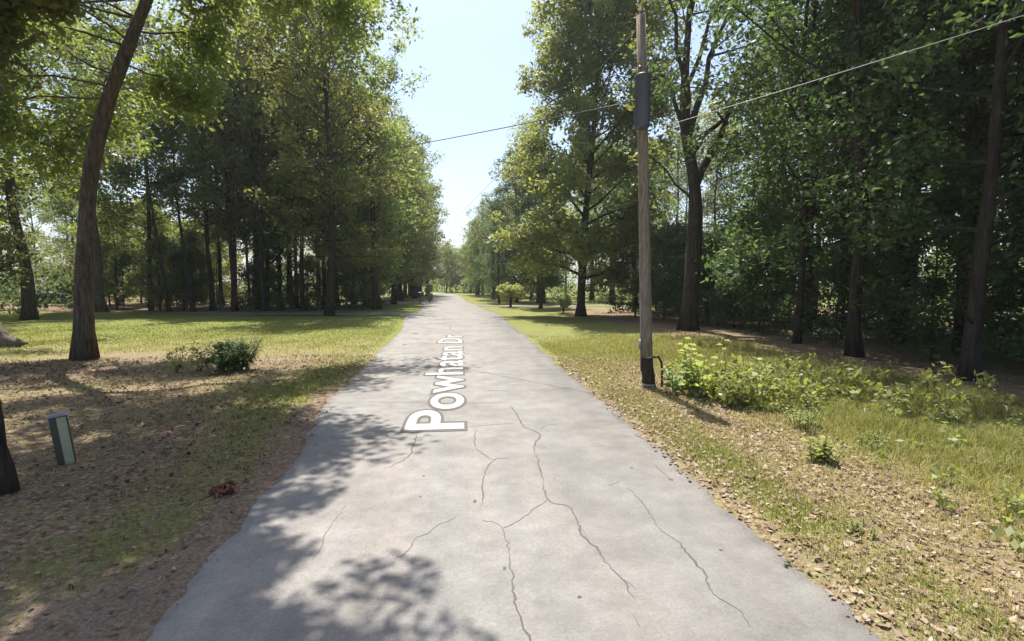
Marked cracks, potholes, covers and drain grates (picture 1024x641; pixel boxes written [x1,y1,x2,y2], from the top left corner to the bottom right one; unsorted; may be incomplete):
crack [371,372,640,641]
crack [610,481,750,626]
